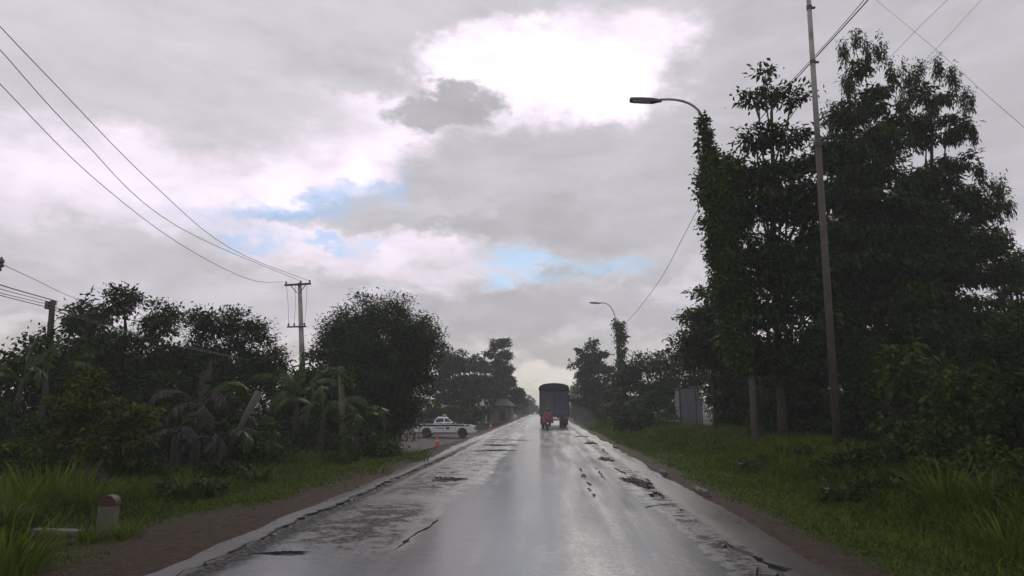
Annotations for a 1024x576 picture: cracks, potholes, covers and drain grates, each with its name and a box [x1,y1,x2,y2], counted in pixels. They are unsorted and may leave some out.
pothole [619,477,655,490]
crack [391,519,438,551]
crack [580,441,682,512]
